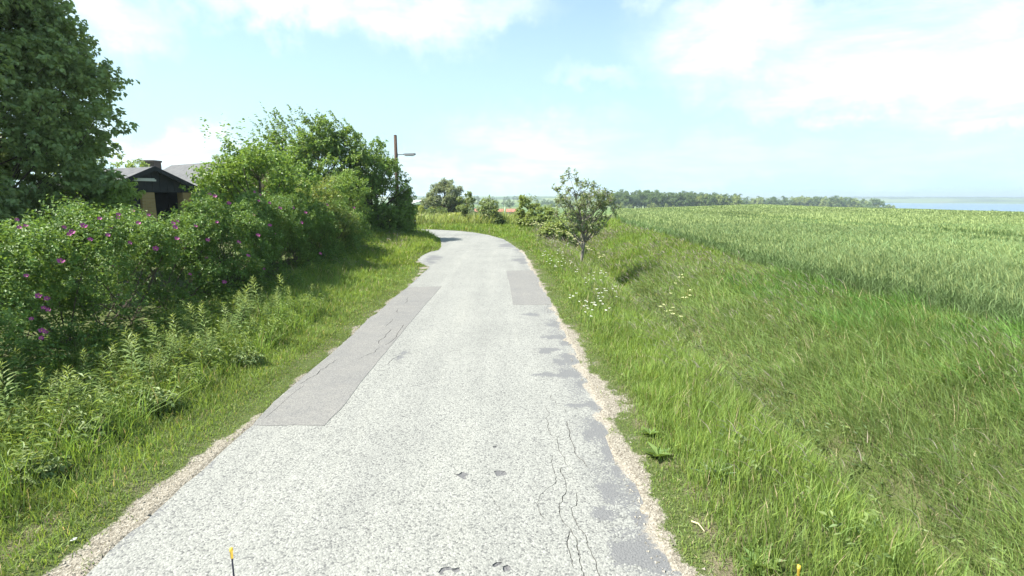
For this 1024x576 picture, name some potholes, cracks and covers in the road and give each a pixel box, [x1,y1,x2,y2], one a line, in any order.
crack [537,396,600,576]
